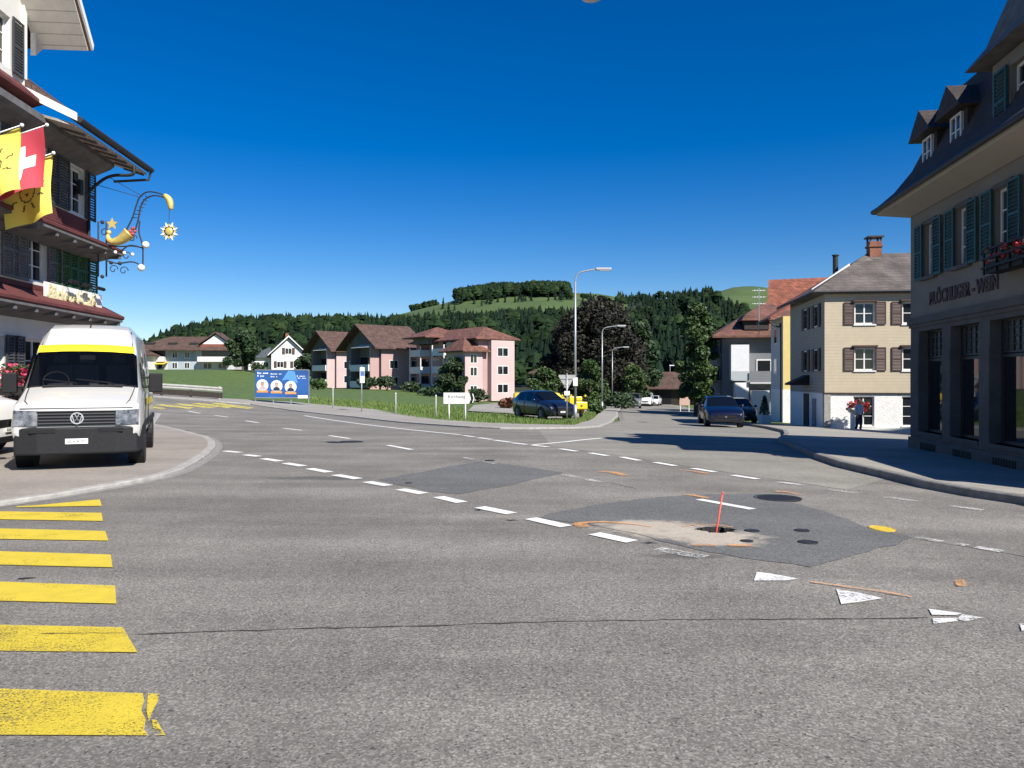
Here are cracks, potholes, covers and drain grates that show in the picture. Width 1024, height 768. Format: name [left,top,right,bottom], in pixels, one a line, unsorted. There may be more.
manhole cover [753,494,802,502]
crack [1,617,928,635]
